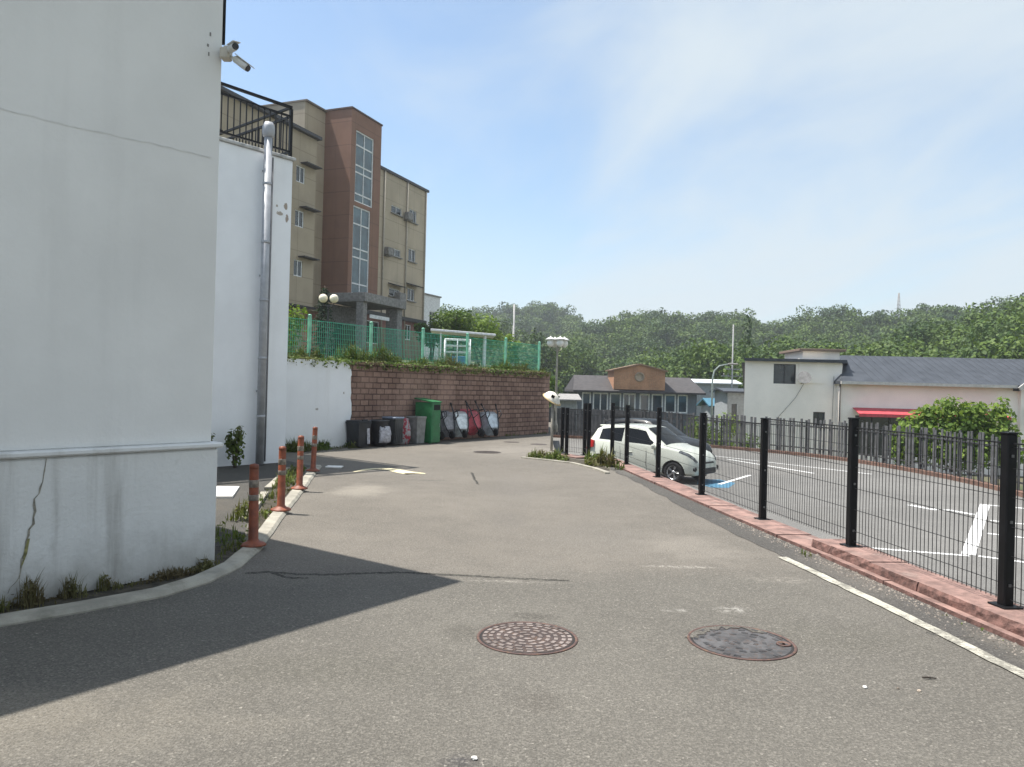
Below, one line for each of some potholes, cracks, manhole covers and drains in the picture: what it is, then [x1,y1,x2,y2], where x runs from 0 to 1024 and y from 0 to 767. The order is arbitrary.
manhole cover [477,621,578,655]
crack [245,571,569,581]
manhole cover [685,625,798,661]
